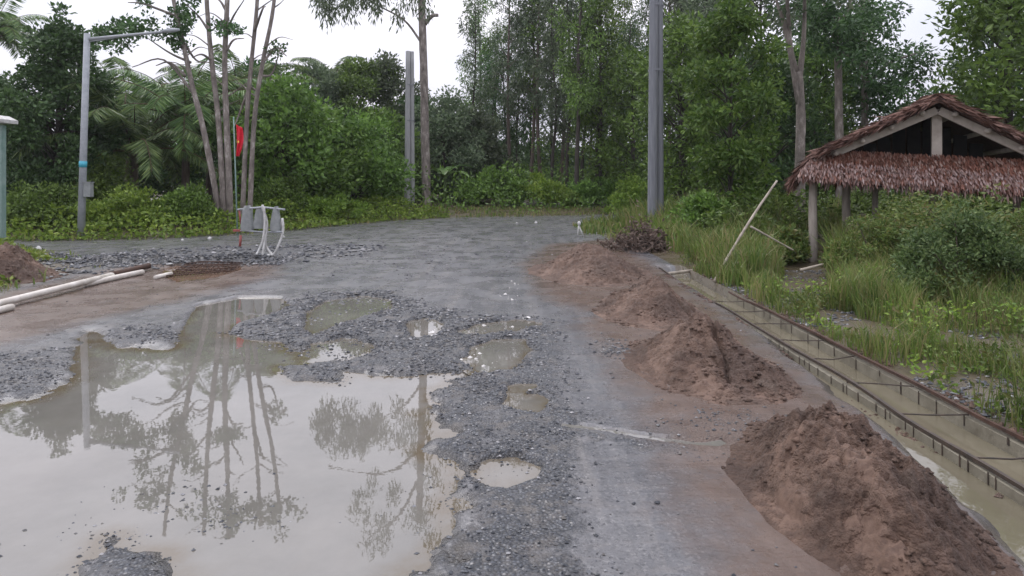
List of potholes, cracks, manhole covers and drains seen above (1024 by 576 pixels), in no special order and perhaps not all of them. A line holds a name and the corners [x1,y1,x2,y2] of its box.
pothole [494,389,557,413]
pothole [176,295,298,333]
pothole [296,292,397,335]
pothole [453,333,539,375]
pothole [0,321,517,576]
pothole [496,378,547,401]
pothole [450,316,548,336]
pothole [400,314,449,338]
pothole [463,448,552,490]
